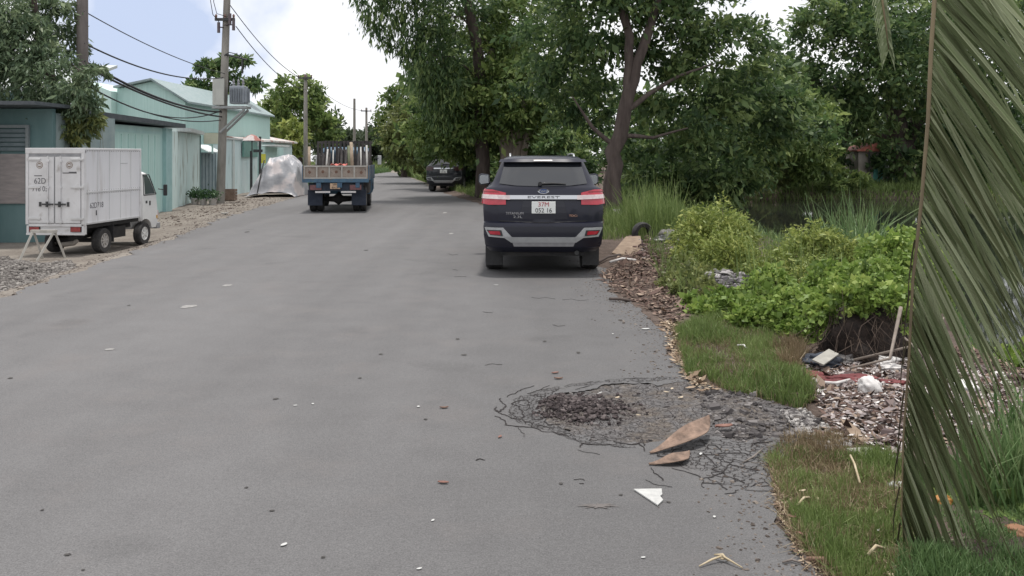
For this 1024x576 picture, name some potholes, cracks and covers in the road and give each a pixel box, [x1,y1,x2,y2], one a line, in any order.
crack [494,386,784,494]
pothole [538,381,826,444]
